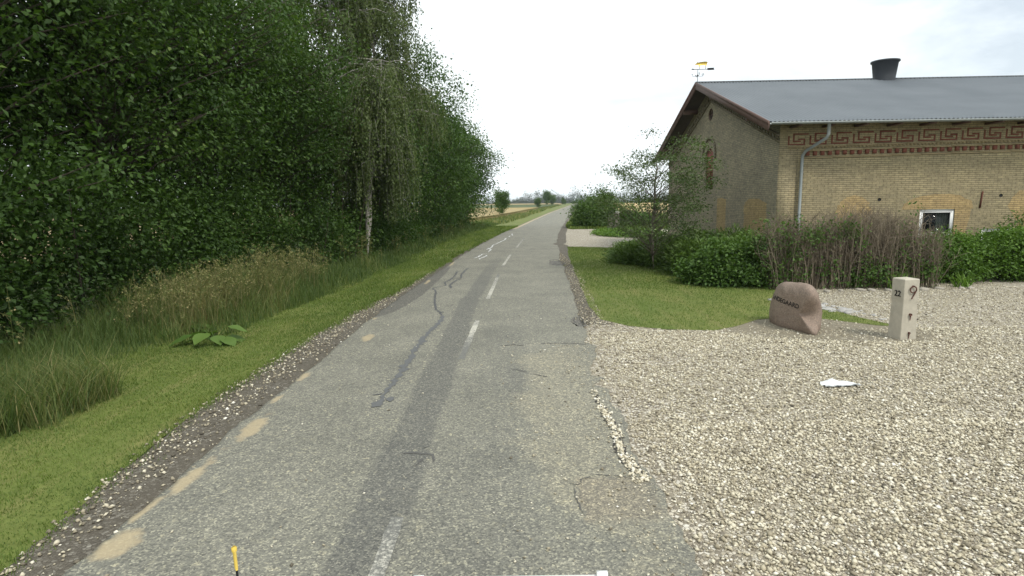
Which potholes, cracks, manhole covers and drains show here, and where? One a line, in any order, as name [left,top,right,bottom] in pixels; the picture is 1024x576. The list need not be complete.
crack [405,446,436,466]
crack [571,389,652,515]
